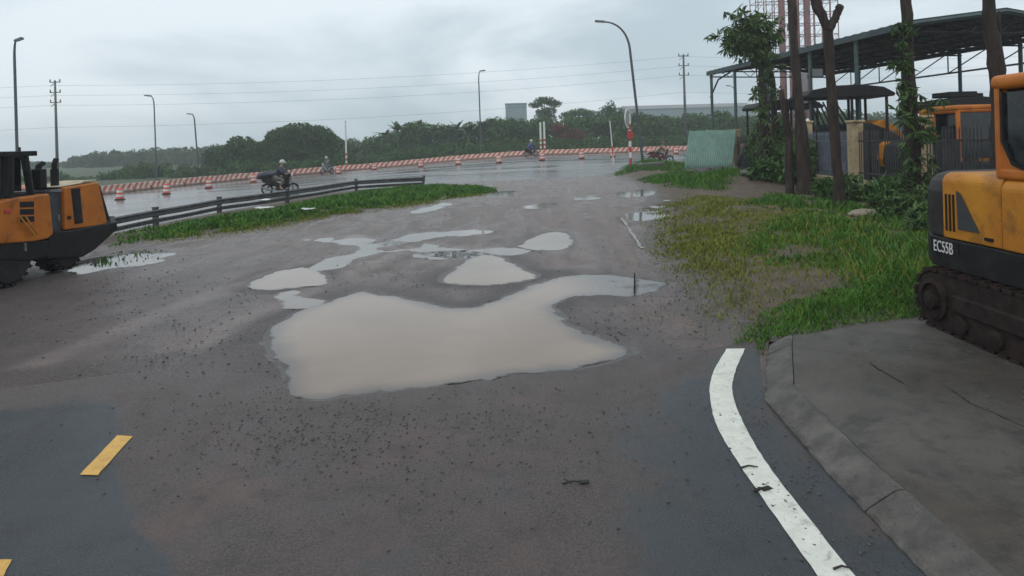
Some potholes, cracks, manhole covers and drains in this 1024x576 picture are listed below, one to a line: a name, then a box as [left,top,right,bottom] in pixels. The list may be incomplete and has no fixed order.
pothole [259,274,672,401]
crack [953,391,1024,427]
